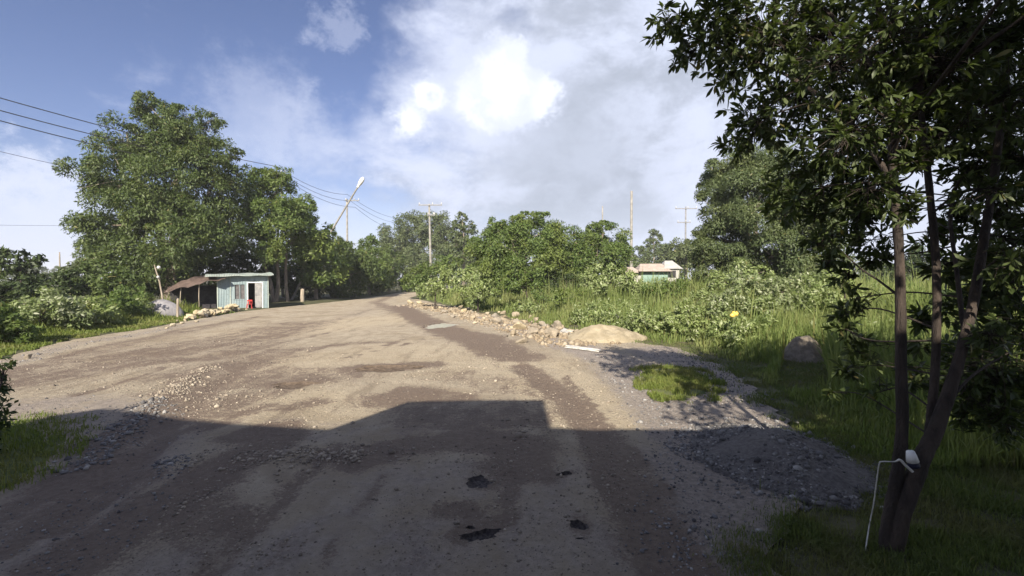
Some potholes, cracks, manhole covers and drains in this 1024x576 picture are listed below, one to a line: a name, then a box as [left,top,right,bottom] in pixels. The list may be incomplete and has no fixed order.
pothole [570,519,589,530]
pothole [458,528,501,542]
pothole [466,474,493,488]
